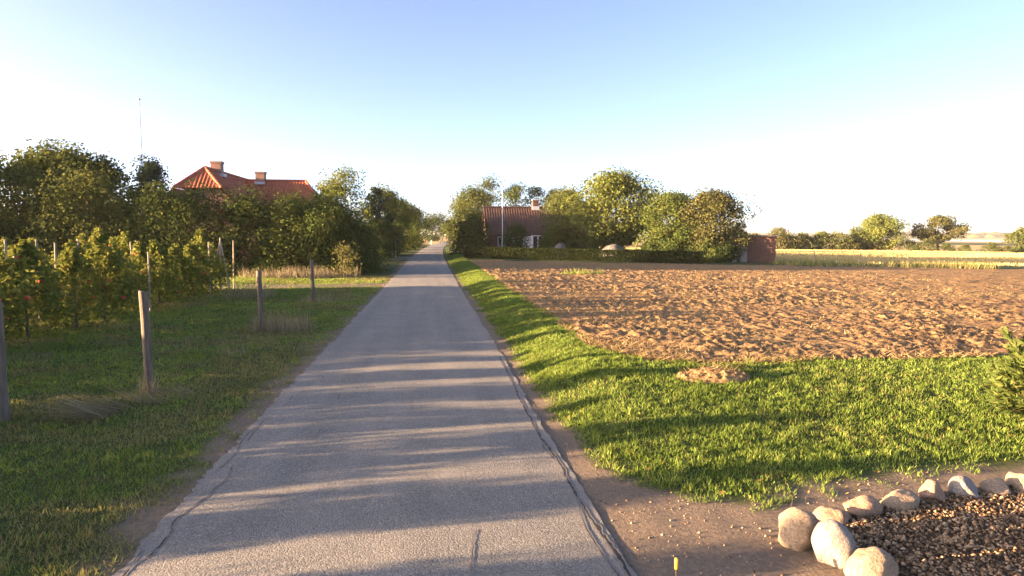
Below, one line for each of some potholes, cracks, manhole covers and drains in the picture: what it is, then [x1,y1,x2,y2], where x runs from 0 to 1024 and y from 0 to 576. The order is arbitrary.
crack [121,395,293,576]
crack [499,356,633,576]
